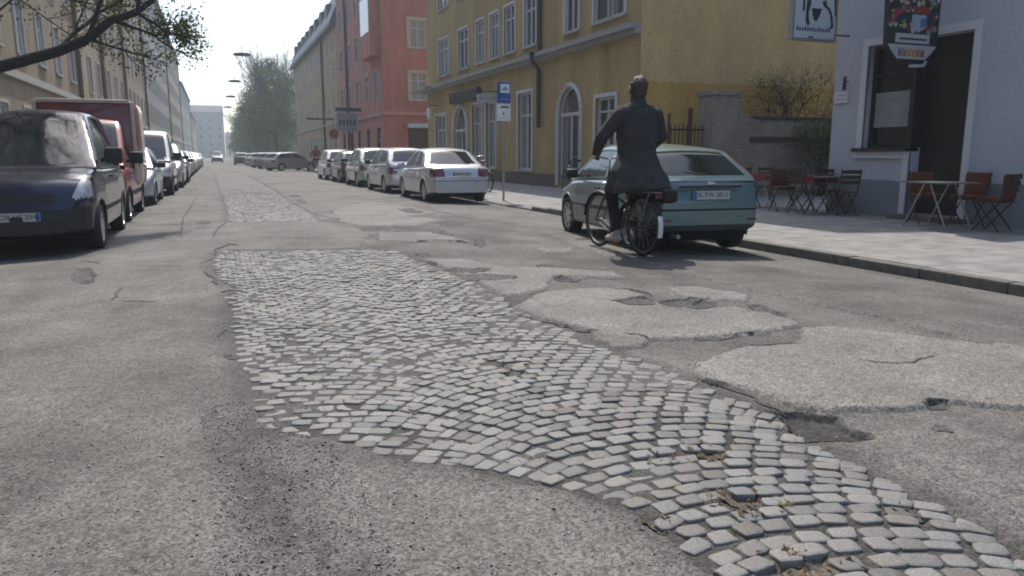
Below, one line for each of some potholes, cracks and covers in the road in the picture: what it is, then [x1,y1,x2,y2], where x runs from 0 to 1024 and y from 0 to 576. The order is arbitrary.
pothole [657,296,718,309]
pothole [612,295,656,305]
crack [111,286,157,302]
pothole [922,397,949,410]
crack [158,197,389,305]
pothole [768,410,875,443]
crack [860,355,933,363]
